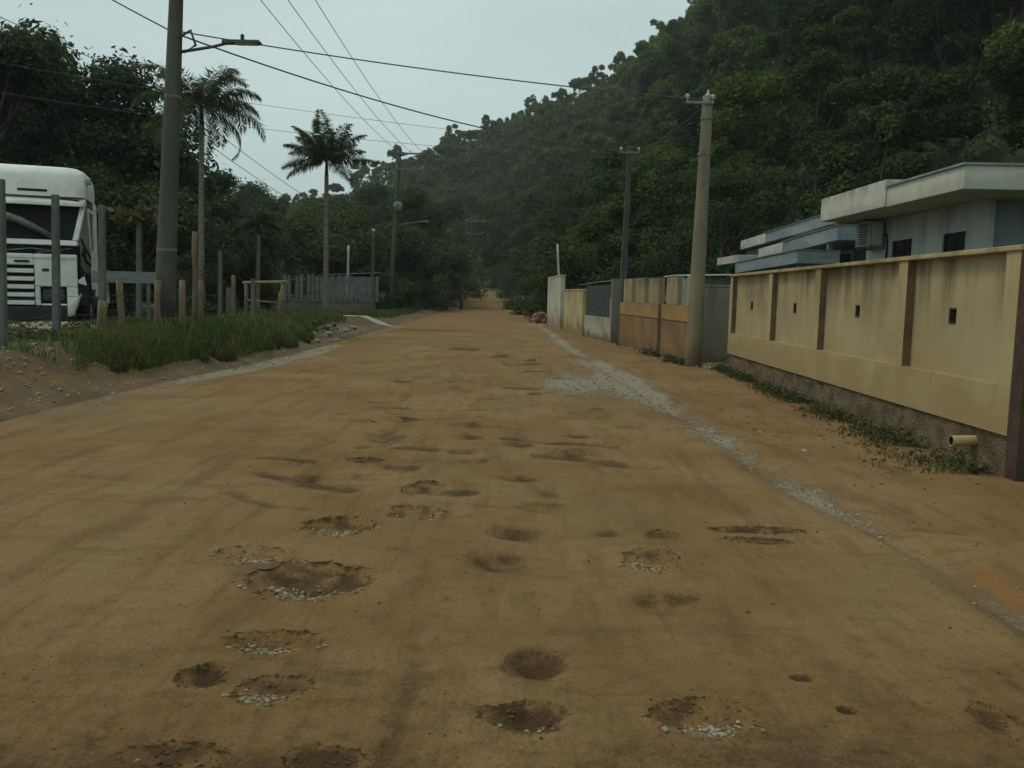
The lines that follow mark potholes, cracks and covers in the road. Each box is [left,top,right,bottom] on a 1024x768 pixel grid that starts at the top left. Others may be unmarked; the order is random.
pothole [389,478,458,498]
pothole [632,690,778,750]
pothole [452,549,549,576]
pothole [711,535,803,548]
pothole [264,738,387,768]
pothole [700,524,818,536]
pothole [464,693,585,743]
pothole [232,556,385,608]
pothole [377,502,460,522]
pothole [199,542,296,570]
pothole [950,694,1024,749]
pothole [491,643,582,687]
